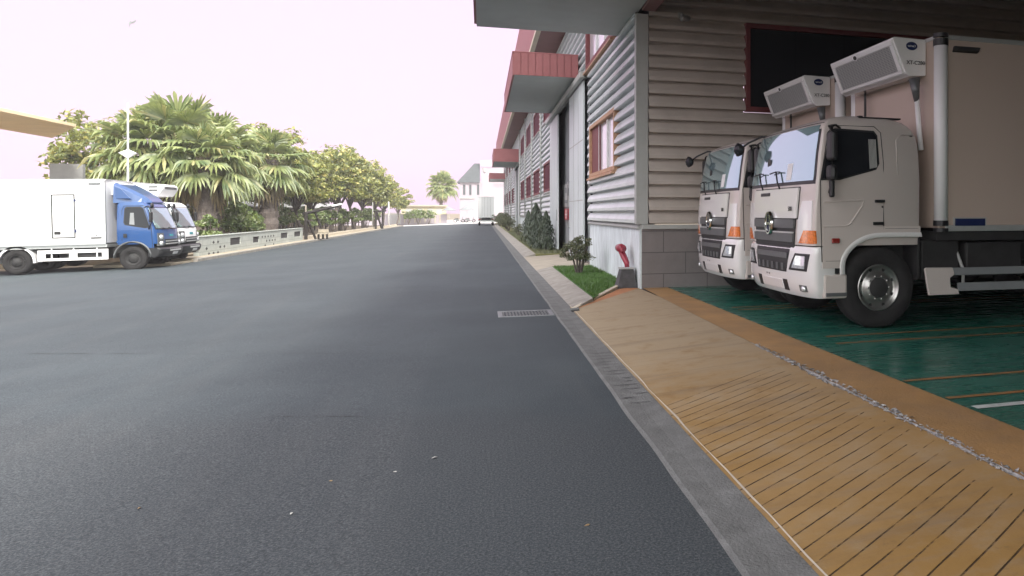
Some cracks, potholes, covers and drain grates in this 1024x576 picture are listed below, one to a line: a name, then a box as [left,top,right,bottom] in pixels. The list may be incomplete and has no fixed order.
drain grate [497,309,555,318]
